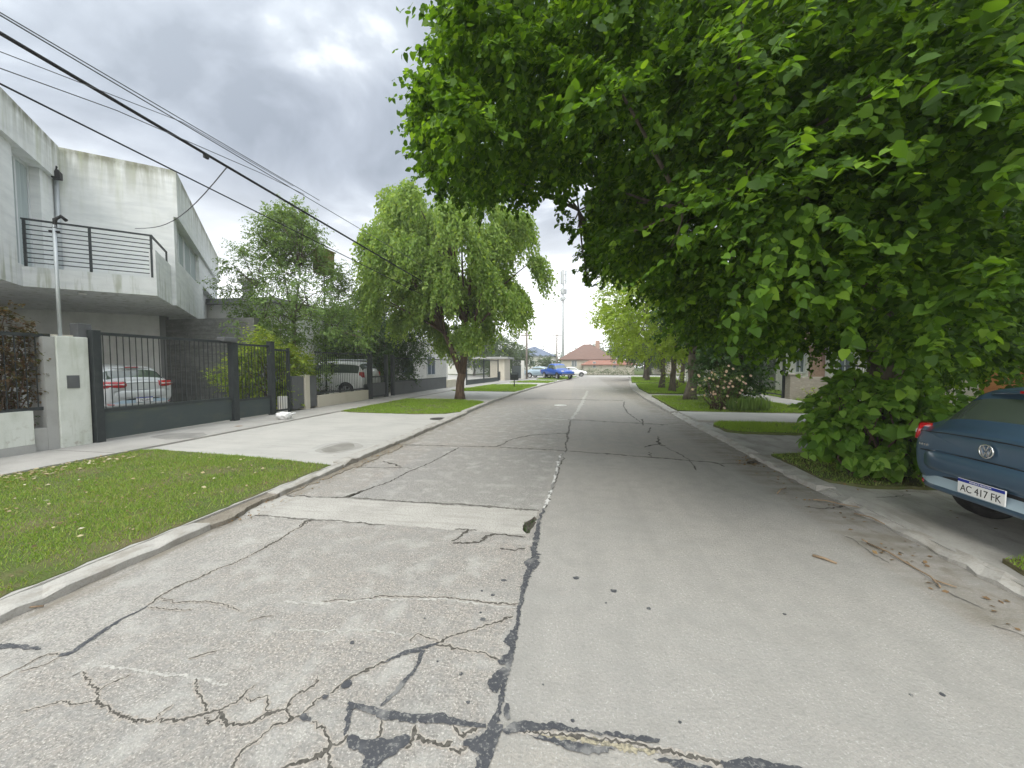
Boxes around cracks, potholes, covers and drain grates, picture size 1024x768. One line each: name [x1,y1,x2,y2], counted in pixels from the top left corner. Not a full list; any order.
crack [623,401,696,470]
crack [345,447,459,497]
crack [518,730,722,768]
crack [0,518,518,768]
